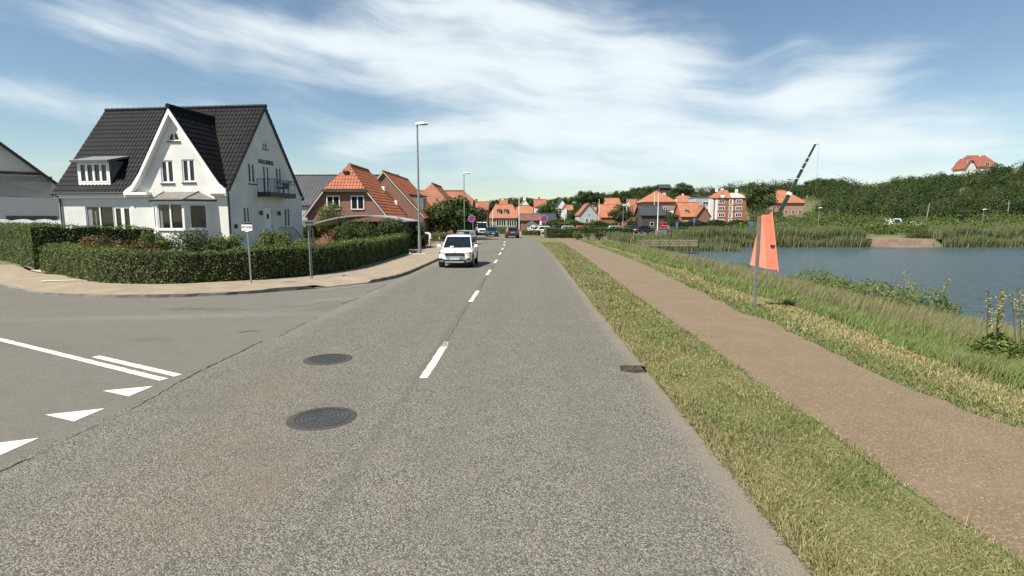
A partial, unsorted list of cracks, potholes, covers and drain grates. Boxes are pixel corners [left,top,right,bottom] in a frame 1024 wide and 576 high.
manhole cover [303,354,353,365]
manhole cover [286,407,357,431]
